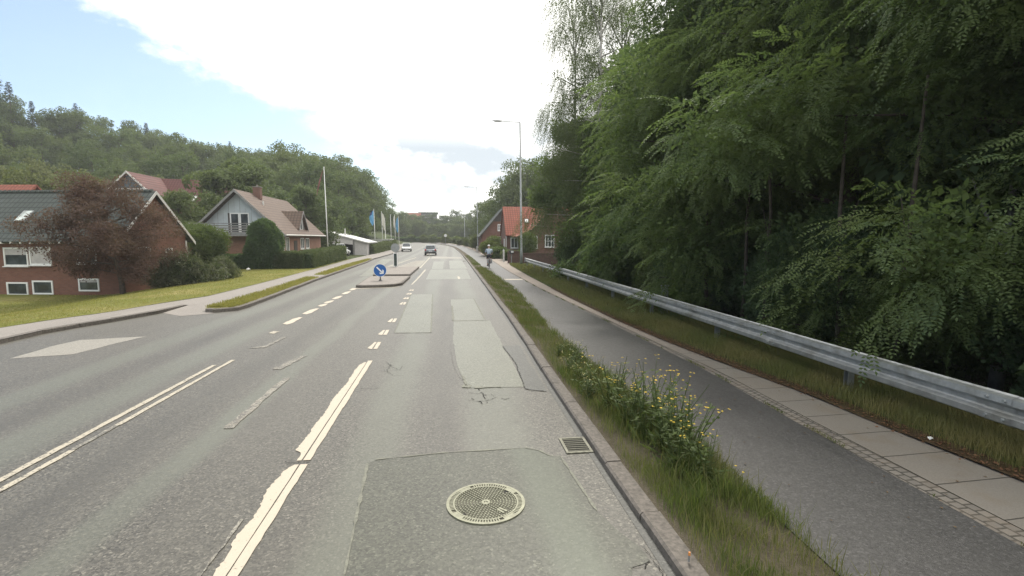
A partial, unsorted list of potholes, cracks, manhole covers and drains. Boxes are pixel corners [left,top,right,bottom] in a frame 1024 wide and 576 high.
manhole cover [446,483,525,525]
drain grate [559,437,594,454]
